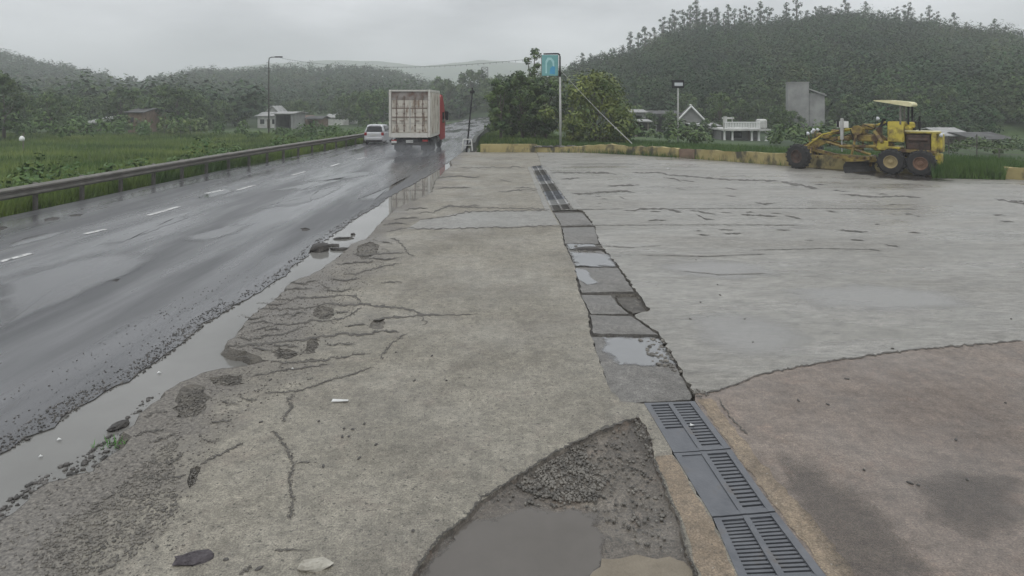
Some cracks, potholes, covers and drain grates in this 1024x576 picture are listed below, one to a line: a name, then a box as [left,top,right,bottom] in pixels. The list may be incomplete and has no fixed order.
pothole [210,375,242,386]
crack [993,199,1024,222]
pothole [173,385,211,419]
pothole [413,418,698,576]
crack [134,166,920,575]
